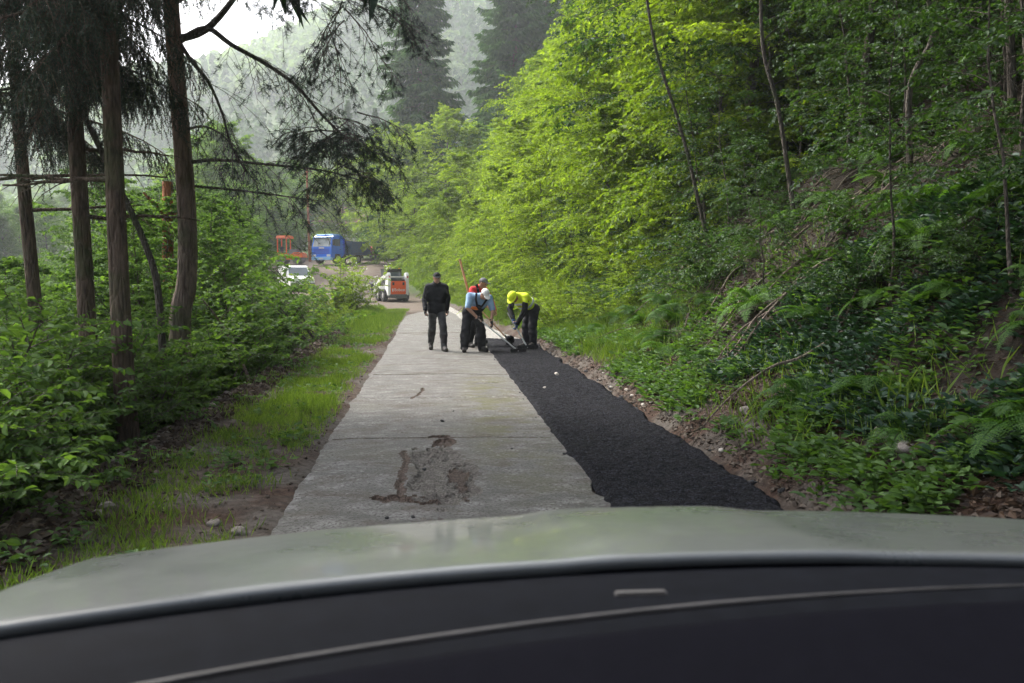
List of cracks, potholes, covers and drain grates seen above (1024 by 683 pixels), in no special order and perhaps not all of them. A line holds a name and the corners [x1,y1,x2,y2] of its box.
pothole [428,435,457,448]
